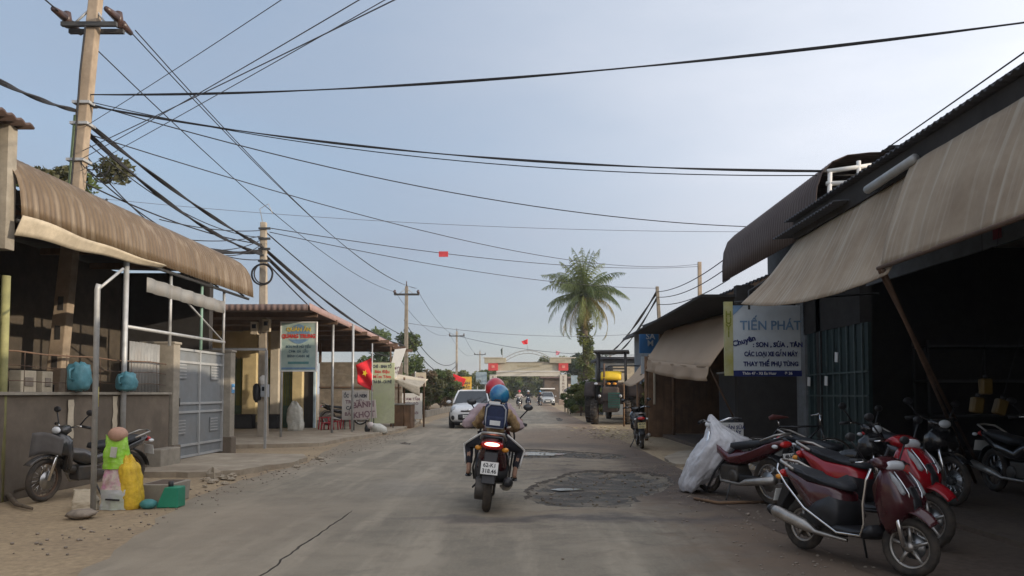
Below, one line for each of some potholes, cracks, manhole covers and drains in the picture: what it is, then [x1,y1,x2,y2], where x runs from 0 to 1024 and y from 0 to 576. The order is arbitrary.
crack [259,511,352,576]
pothole [523,470,678,508]
